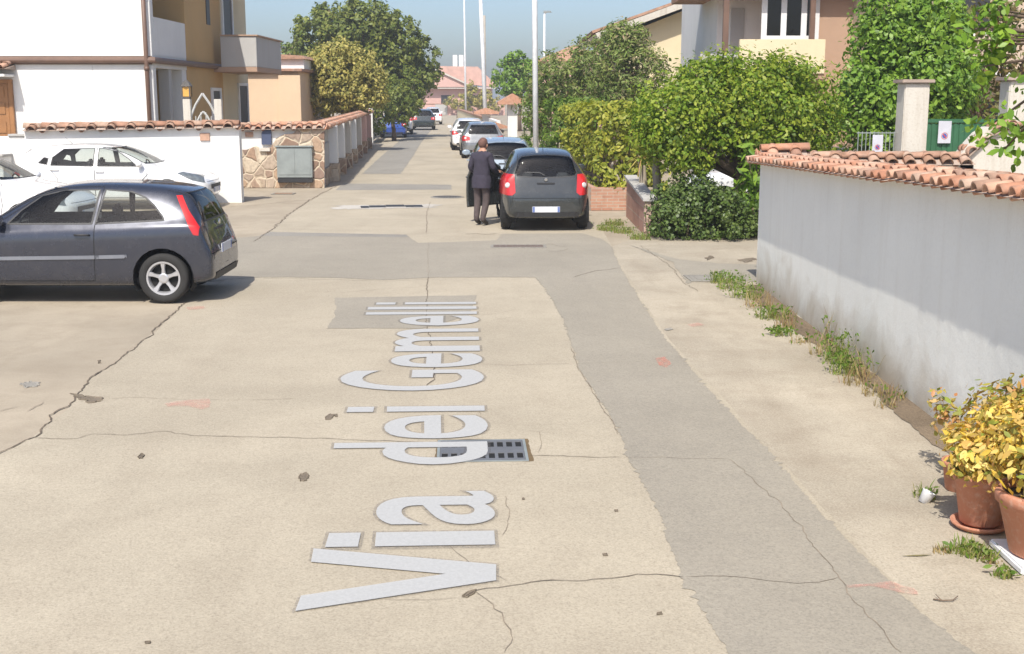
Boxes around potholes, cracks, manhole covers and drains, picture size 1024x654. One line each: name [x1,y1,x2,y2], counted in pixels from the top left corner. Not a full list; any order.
drain grate [435,439,534,462]
crack [51,431,412,442]
crack [449,545,682,652]
crack [671,457,899,651]
